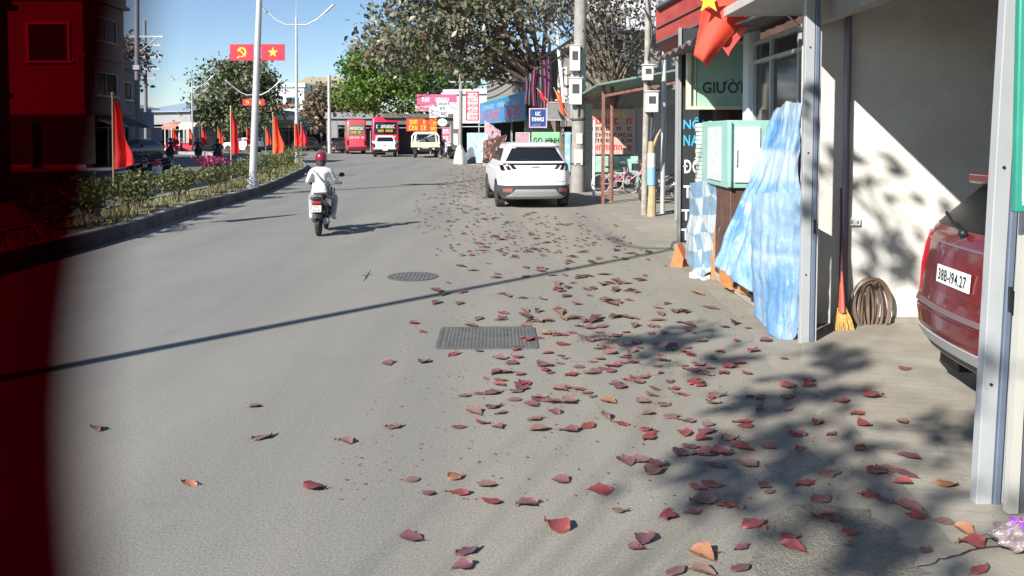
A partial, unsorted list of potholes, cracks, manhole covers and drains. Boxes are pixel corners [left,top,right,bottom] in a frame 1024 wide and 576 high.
manhole cover [387,272,438,281]
crack [917,538,1000,567]
